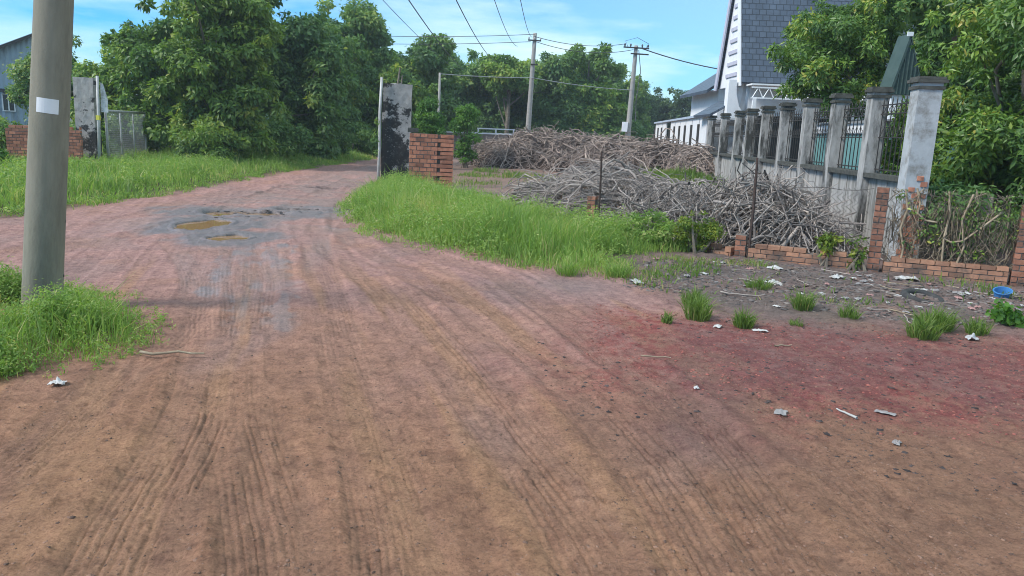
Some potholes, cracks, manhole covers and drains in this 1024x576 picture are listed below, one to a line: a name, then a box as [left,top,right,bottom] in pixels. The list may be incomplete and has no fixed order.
pothole [200,232,257,242]
pothole [167,217,239,232]
